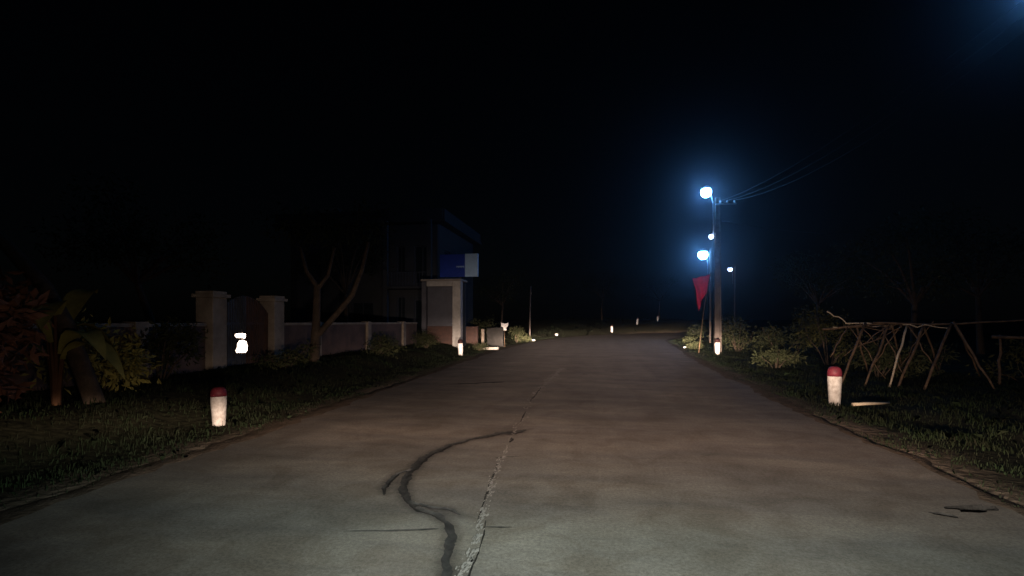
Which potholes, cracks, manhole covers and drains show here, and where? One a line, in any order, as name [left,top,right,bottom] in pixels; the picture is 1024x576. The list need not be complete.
crack [354,388,541,576]
pothole [944,504,999,513]
